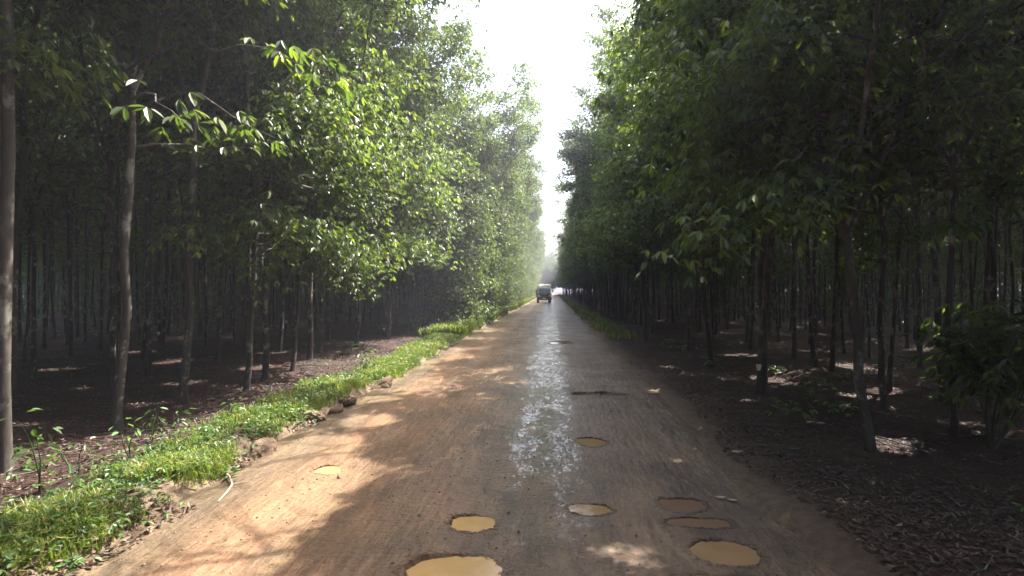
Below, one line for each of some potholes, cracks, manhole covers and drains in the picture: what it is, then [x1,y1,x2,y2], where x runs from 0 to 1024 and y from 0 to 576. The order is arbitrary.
pothole [443,512,501,535]
pothole [563,502,618,517]
pothole [309,464,344,476]
pothole [683,536,772,570]
pothole [566,391,635,400]
pothole [653,496,712,515]
pothole [391,548,514,576]
